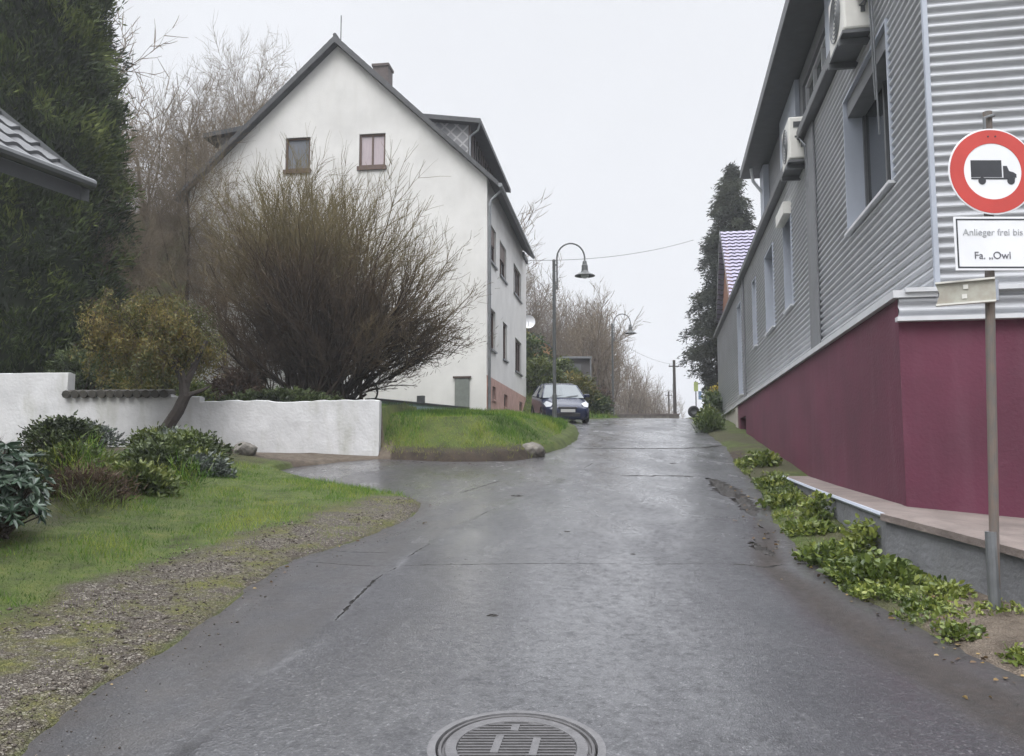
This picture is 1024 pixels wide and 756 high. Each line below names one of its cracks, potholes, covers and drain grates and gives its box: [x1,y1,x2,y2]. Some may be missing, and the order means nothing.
pothole [708,478,762,517]
pothole [747,542,775,556]
manhole cover [427,710,606,756]
crack [316,544,779,620]
